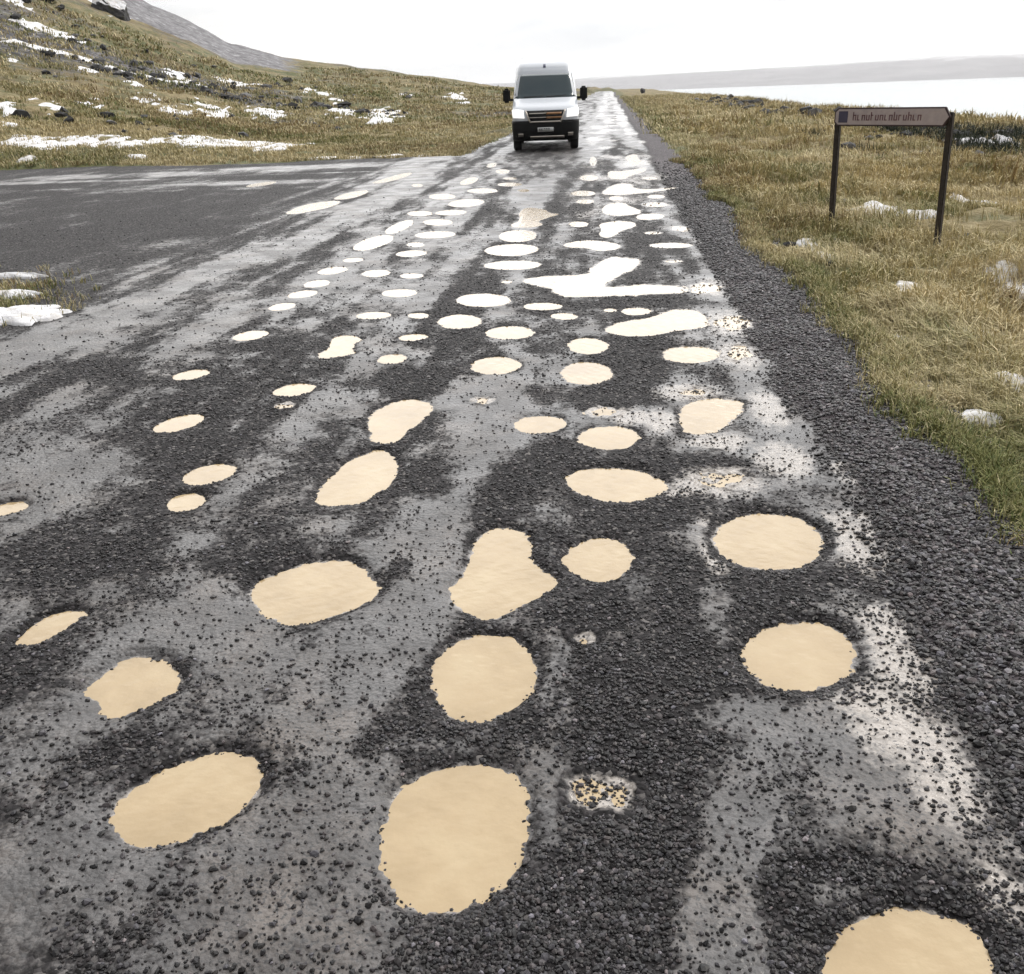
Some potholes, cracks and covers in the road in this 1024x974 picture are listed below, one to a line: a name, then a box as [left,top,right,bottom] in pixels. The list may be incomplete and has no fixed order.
pothole [565,421,652,452]
pothole [553,460,685,505]
pothole [301,444,410,509]
pothole [352,743,556,935]
pothole [721,608,877,700]
pothole [790,882,1024,974]
pothole [230,549,397,630]
pothole [666,393,755,437]
pothole [514,255,691,299]
pothole [83,733,289,862]
pothole [411,622,559,732]
pothole [63,641,201,725]
